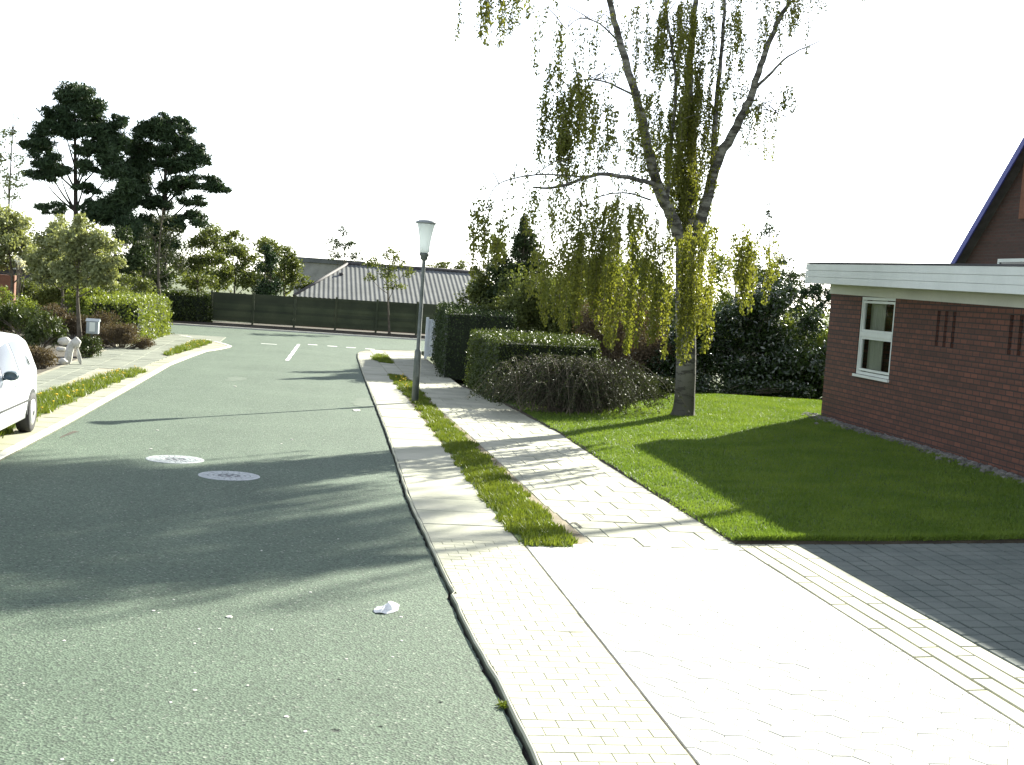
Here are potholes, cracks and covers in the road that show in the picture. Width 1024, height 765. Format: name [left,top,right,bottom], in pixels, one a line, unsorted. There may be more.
manhole cover [198,471,260,481]
manhole cover [145,455,204,464]
